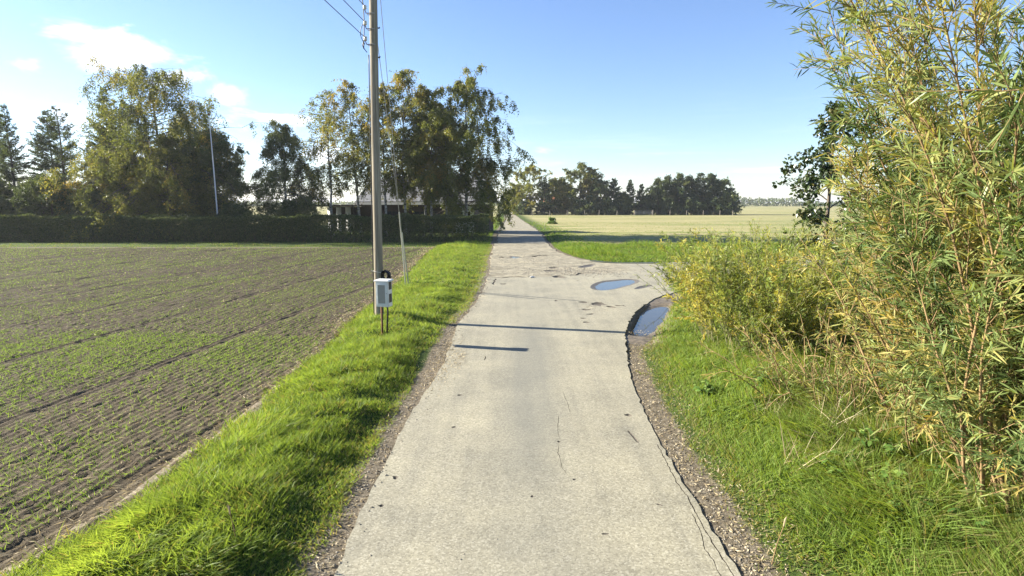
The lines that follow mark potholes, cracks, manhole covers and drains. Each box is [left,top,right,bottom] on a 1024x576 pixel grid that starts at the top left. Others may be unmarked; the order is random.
crack [657,444,734,576]
pothole [590,279,639,290]
pothole [625,293,681,346]
